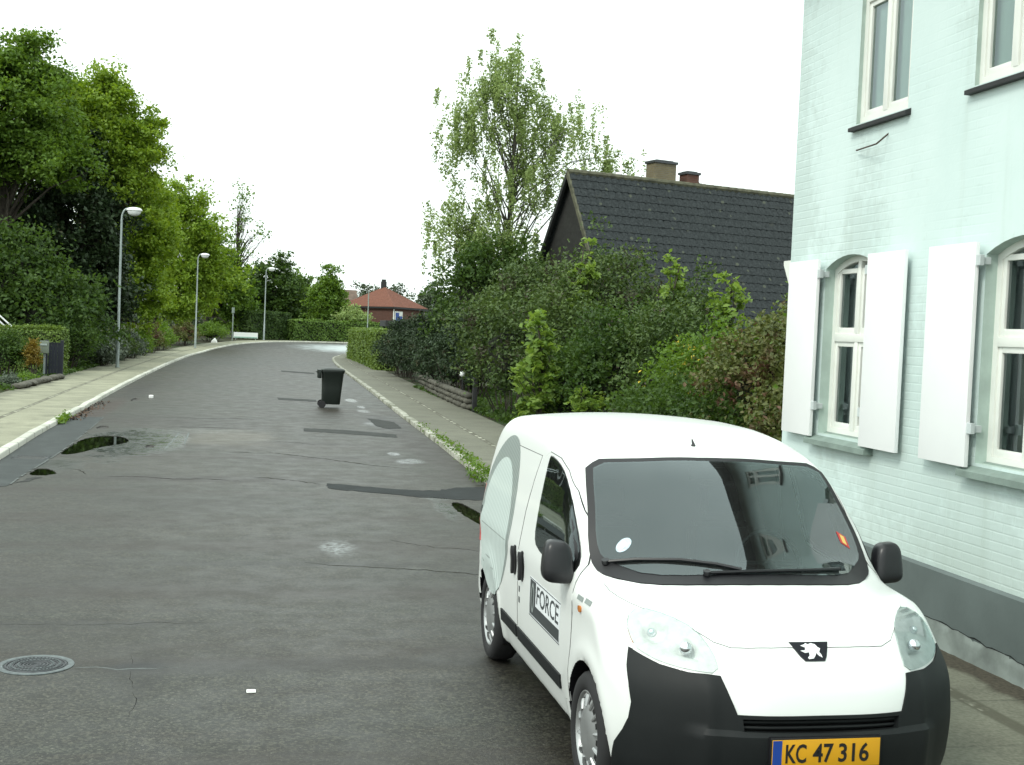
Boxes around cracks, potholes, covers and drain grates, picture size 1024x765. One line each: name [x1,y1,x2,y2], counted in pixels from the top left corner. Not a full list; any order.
crack [269,441,406,469]
pothole [452,502,481,524]
crack [306,562,479,575]
crack [74,657,180,713]
manhole cover [0,655,75,675]
pothole [61,436,128,455]
